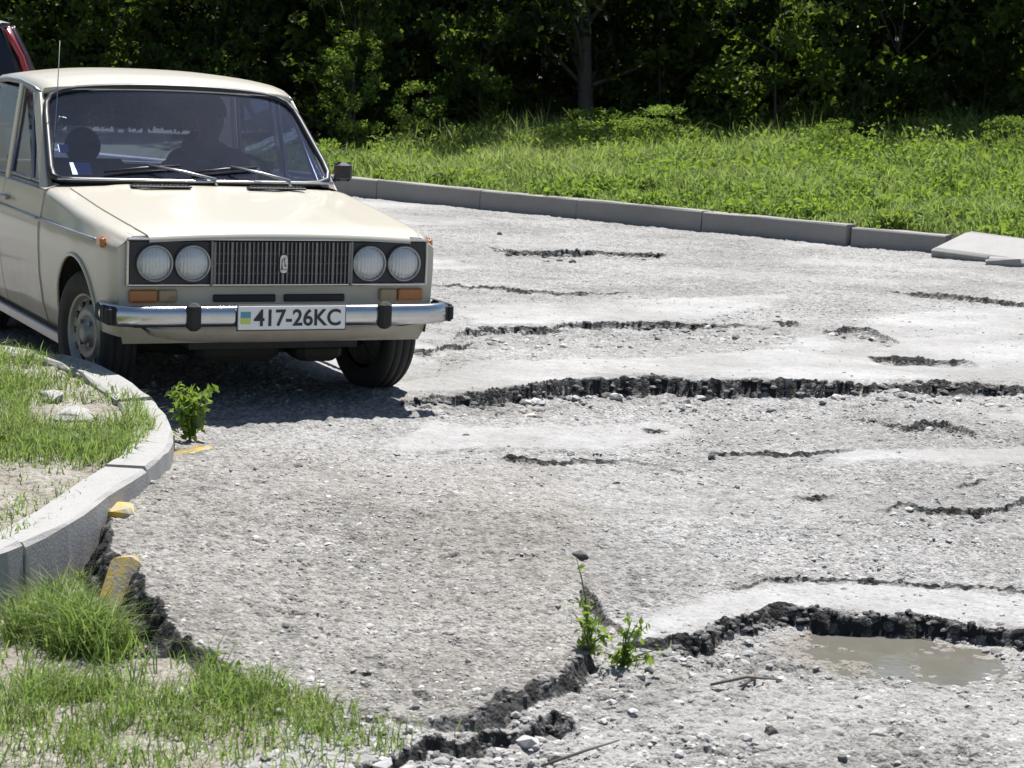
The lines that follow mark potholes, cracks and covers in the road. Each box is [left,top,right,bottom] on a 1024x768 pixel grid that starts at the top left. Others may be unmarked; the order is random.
crack [723,574,1024,597]
pothole [388,373,1024,428]
pothole [451,320,799,360]
pothole [636,601,1024,768]
crack [493,449,855,480]
crack [431,283,631,301]
crack [884,290,1024,308]
pothole [485,247,672,266]
pothole [822,326,901,347]
pothole [226,587,651,768]
